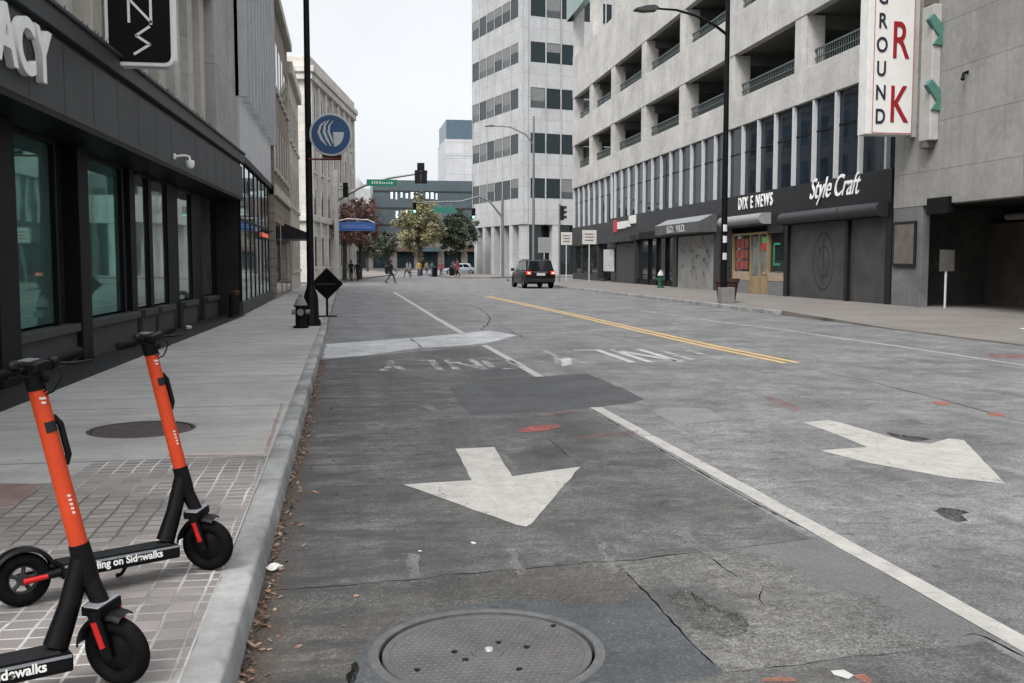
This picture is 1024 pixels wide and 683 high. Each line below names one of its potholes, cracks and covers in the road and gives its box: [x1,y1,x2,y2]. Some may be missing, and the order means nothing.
manhole cover [86,421,196,438]
pothole [935,507,969,522]
pothole [886,432,931,441]
crack [271,538,814,591]
pothole [667,590,749,637]
manhole cover [369,609,605,683]
